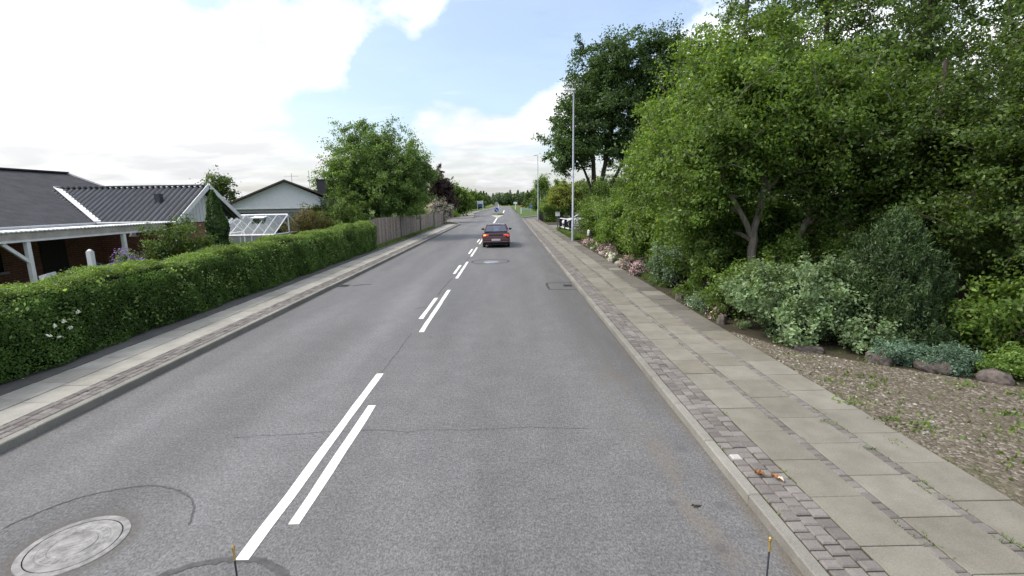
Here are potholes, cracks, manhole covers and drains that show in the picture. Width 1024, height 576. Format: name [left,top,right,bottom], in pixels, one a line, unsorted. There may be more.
manhole cover [11,516,132,576]
crack [228,427,591,438]
